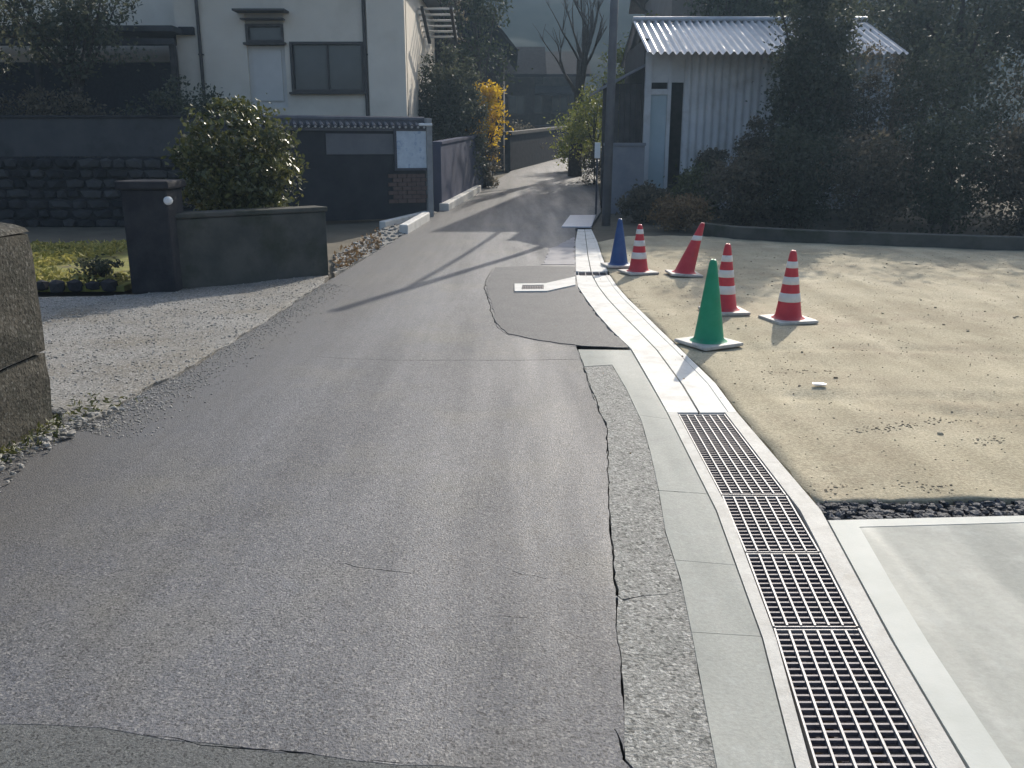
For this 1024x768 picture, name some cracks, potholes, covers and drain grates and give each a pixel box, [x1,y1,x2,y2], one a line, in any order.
crack [584,371,625,762]
drain grate [746,553,858,631]
drain grate [722,496,820,555]
drain grate [774,628,935,768]
drain grate [679,414,786,496]
